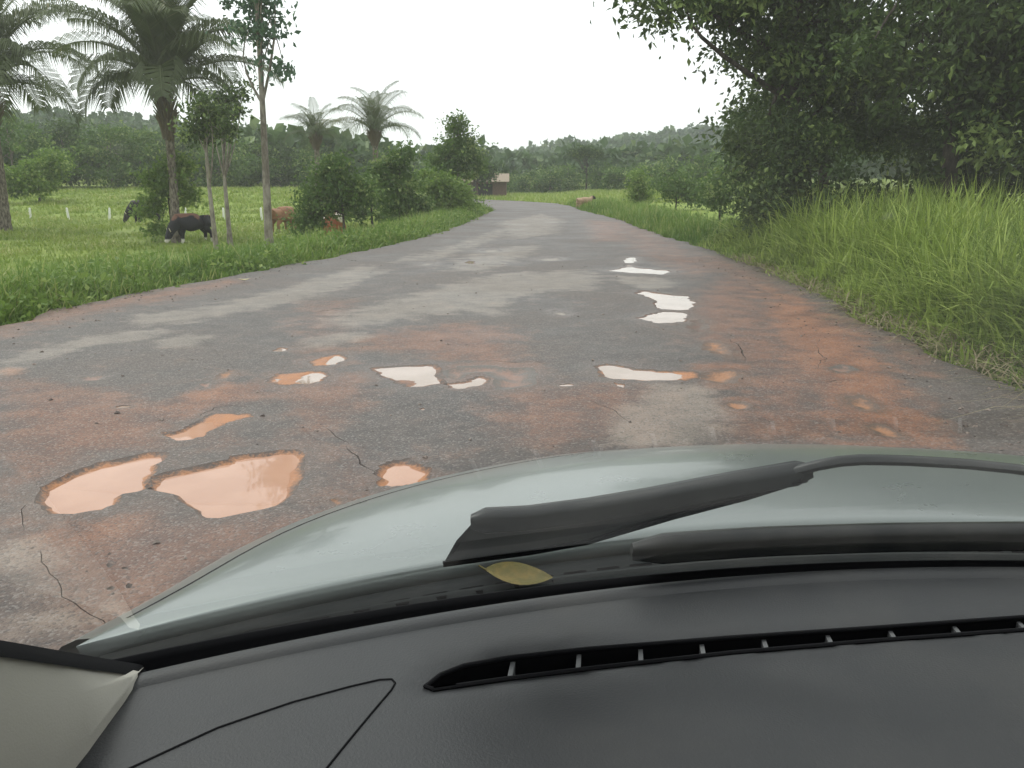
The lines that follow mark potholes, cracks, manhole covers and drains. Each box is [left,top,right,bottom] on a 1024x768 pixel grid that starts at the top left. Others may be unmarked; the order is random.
crack [327,428,377,476]
pothole [442,365,538,390]
pothole [160,413,255,441]
pothole [633,290,698,310]
pothole [264,370,331,386]
pothole [369,364,447,388]
pothole [308,354,348,366]
pothole [34,452,170,514]
pothole [144,449,306,518]
pothole [593,363,701,381]
pothole [637,311,690,323]
pothole [372,457,433,487]
